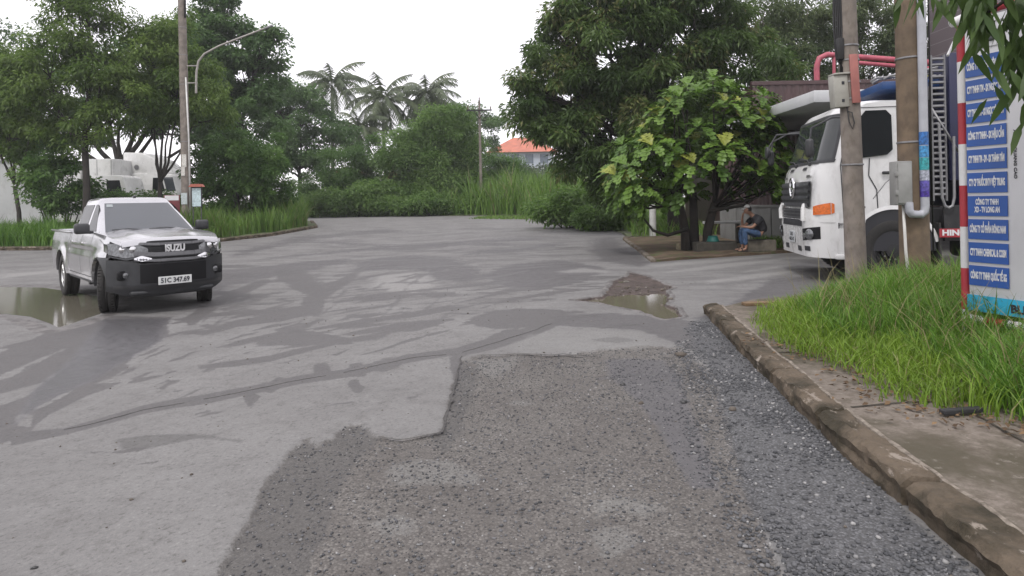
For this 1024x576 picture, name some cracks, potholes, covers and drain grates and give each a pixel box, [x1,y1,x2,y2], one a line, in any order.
crack [64,324,549,440]
pothole [568,271,689,320]
